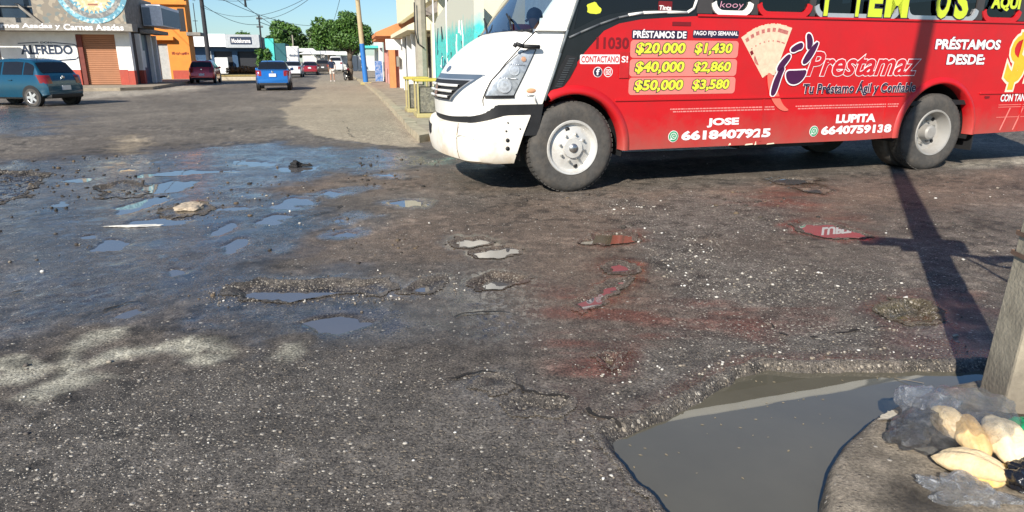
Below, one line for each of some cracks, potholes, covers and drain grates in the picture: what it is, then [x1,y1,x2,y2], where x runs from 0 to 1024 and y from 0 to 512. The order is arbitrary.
pothole [787,220,876,239]
pothole [466,270,535,291]
pothole [577,230,643,246]
pothole [93,180,154,199]
pothole [589,357,987,512]
crack [450,370,494,378]
pothole [219,277,401,303]
pothole [768,176,820,185]
pothole [448,235,498,249]
pothole [571,275,637,314]
pothole [599,259,642,275]
pothole [157,201,217,220]
